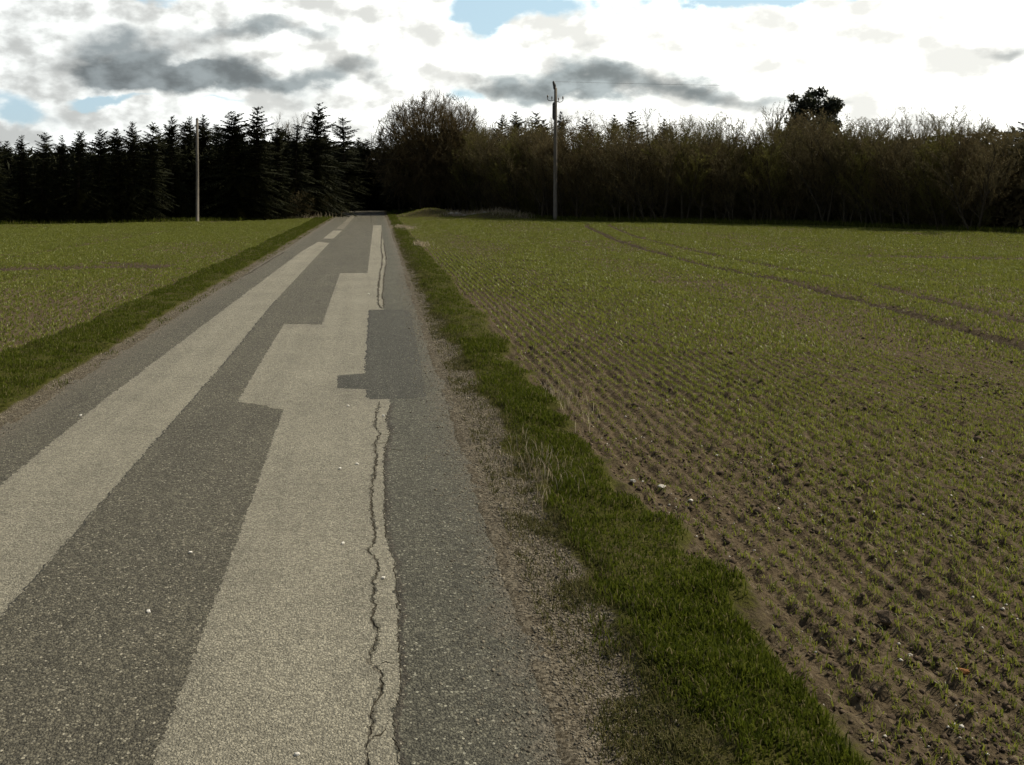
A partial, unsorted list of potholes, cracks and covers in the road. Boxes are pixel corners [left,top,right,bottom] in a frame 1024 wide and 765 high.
crack [364,401,411,765]
crack [370,215,387,309]
